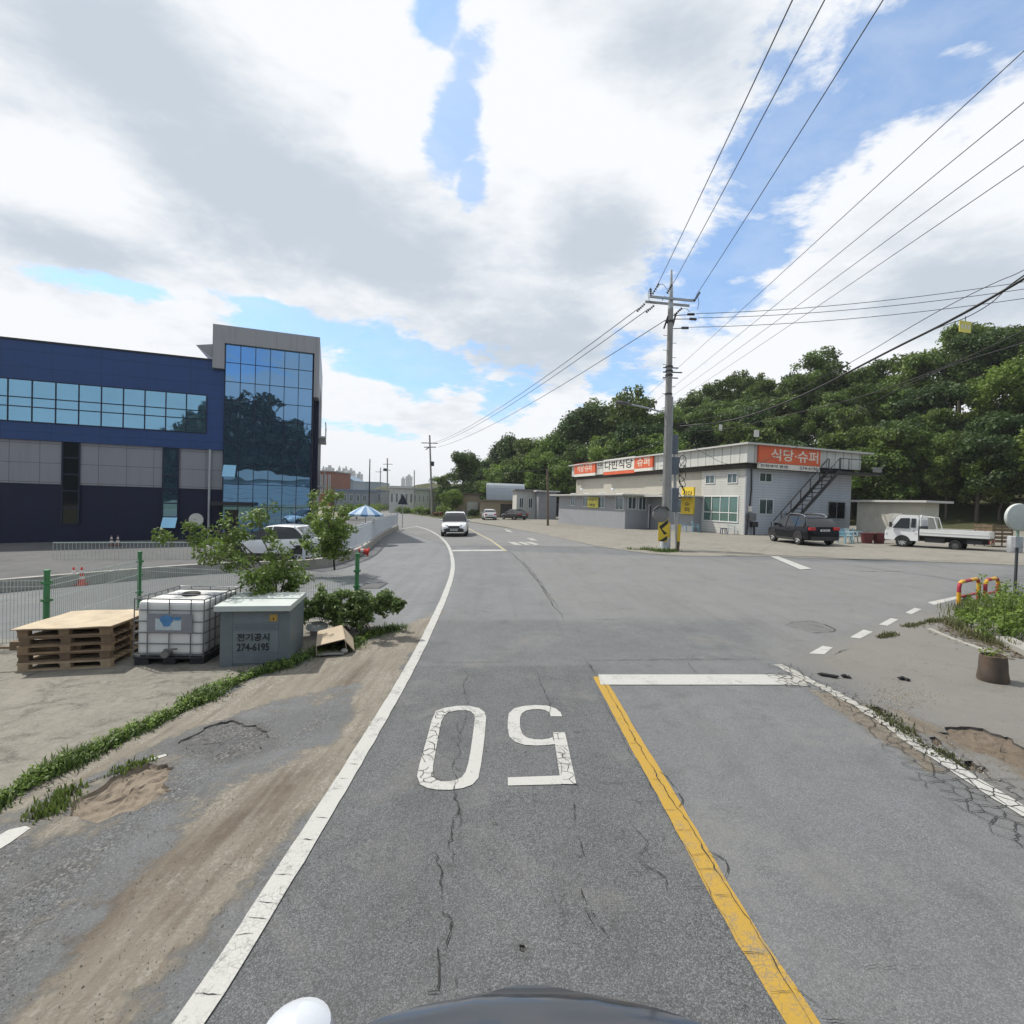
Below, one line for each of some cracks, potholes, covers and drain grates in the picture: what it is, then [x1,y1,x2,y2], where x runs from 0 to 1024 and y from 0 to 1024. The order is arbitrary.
crack [768,663,1024,849]
pothole [52,758,187,832]
crack [572,804,608,937]
pothole [166,716,280,767]
pothole [926,722,1024,773]
